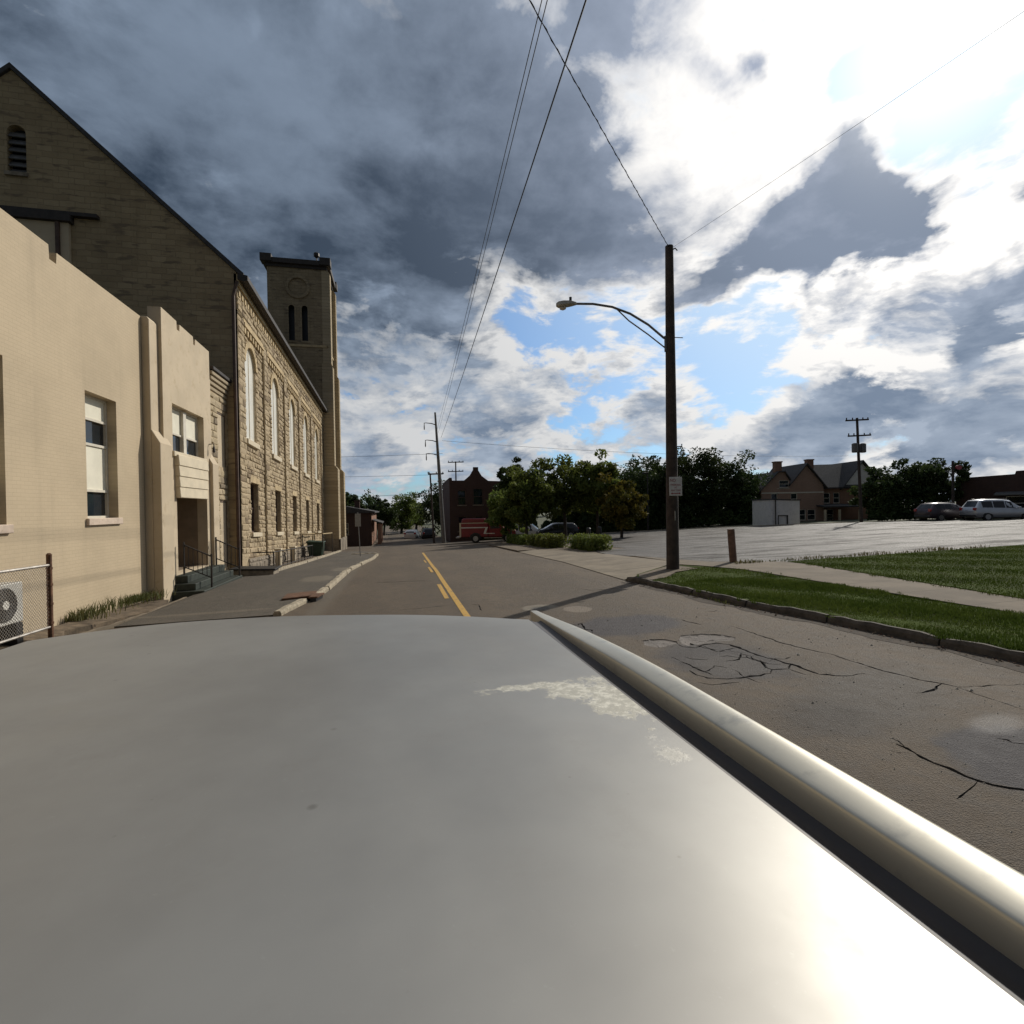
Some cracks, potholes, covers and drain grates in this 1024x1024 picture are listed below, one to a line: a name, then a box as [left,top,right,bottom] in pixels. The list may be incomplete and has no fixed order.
crack [891,738,1024,799]
crack [672,627,1021,709]
